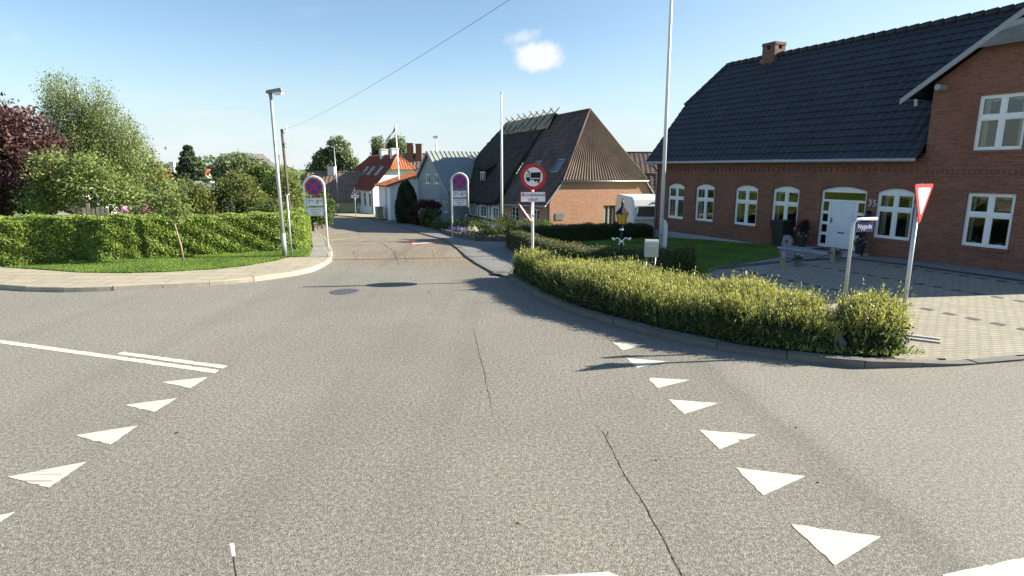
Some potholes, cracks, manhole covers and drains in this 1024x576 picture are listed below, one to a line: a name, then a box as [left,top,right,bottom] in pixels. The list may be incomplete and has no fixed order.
crack [602,431,682,575]
